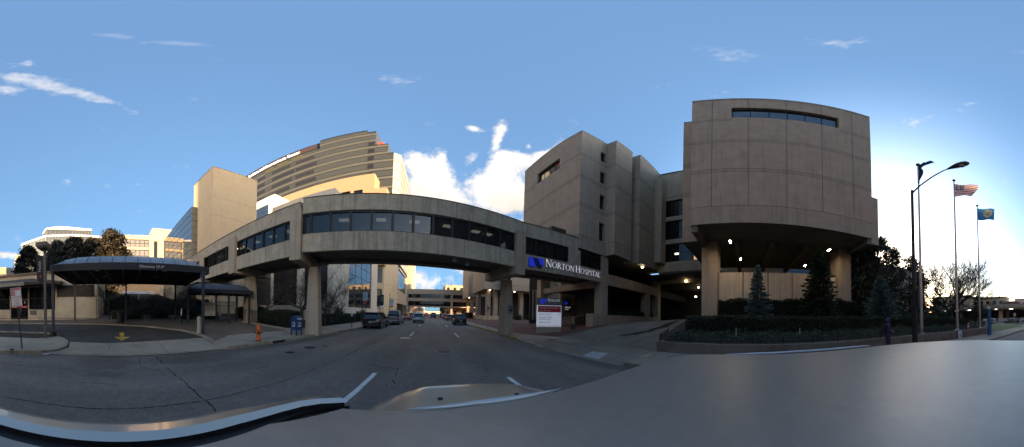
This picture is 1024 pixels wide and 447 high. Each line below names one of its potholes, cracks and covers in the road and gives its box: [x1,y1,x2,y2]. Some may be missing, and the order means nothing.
crack [1,329,401,412]
